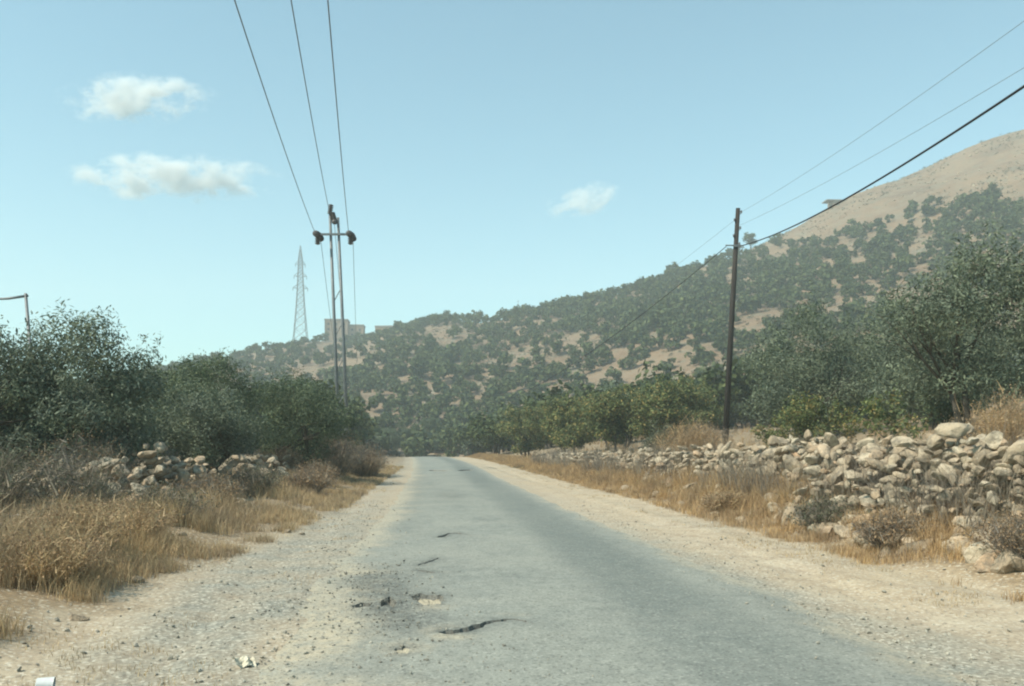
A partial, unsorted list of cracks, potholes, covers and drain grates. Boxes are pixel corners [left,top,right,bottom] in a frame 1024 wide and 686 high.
crack [438,619,529,634]
pothole [410,593,445,605]
